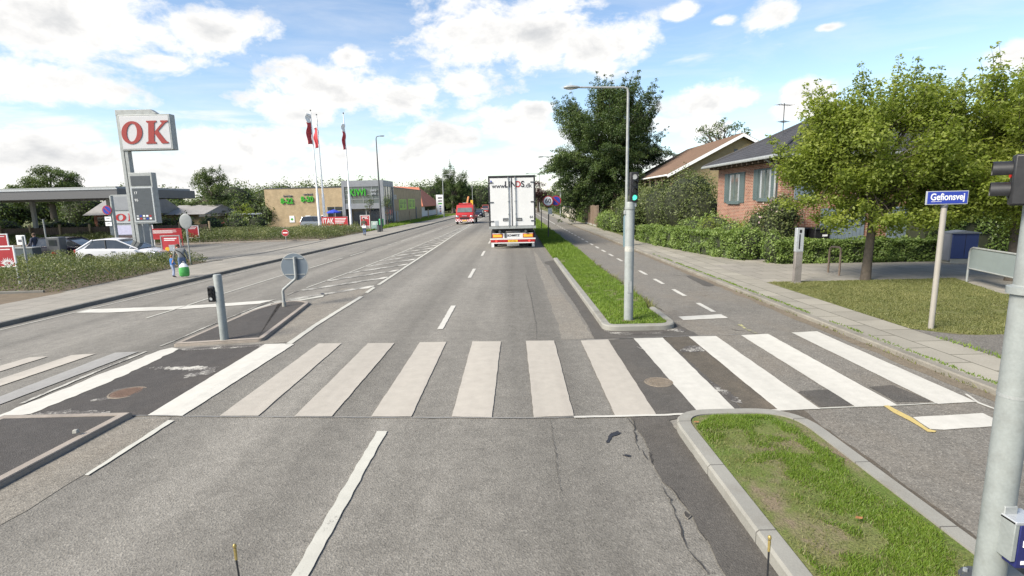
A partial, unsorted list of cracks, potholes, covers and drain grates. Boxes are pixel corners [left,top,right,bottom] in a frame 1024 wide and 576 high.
manhole cover [107,386,147,399]
crack [629,420,654,465]
manhole cover [644,377,673,387]
crack [662,486,709,574]
